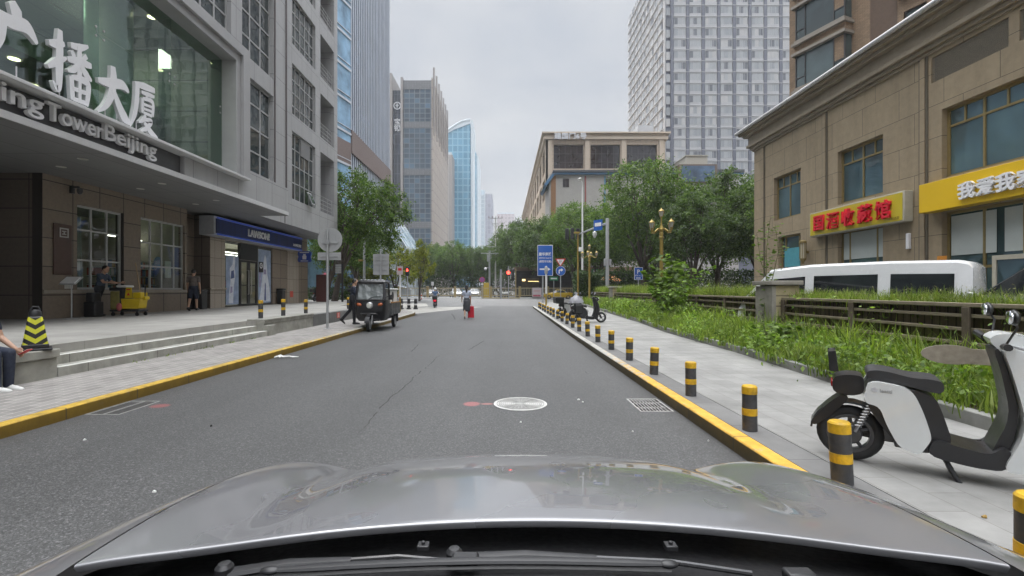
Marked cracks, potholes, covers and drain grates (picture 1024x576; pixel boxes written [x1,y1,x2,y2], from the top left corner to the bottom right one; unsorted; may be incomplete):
manhole cover [494,397,547,411]
drain grate [627,399,674,412]
drain grate [84,401,160,415]
crack [363,344,436,429]
